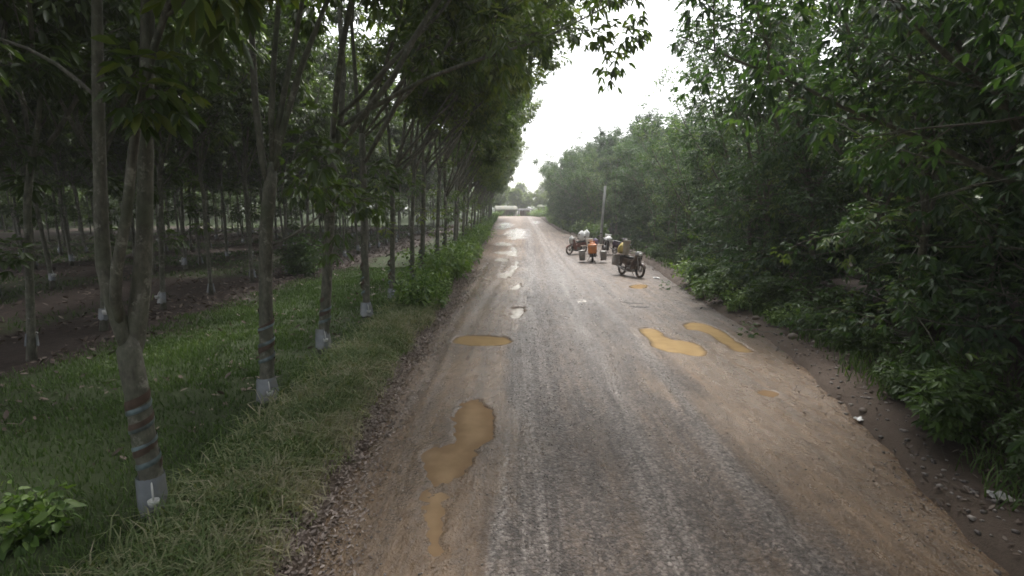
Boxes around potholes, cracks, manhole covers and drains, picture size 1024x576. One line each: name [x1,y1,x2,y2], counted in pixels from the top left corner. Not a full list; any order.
pothole [498,228,533,241]
pothole [444,333,520,349]
pothole [675,320,763,355]
pothole [631,326,716,359]
pothole [492,260,525,279]
pothole [393,392,511,573]
